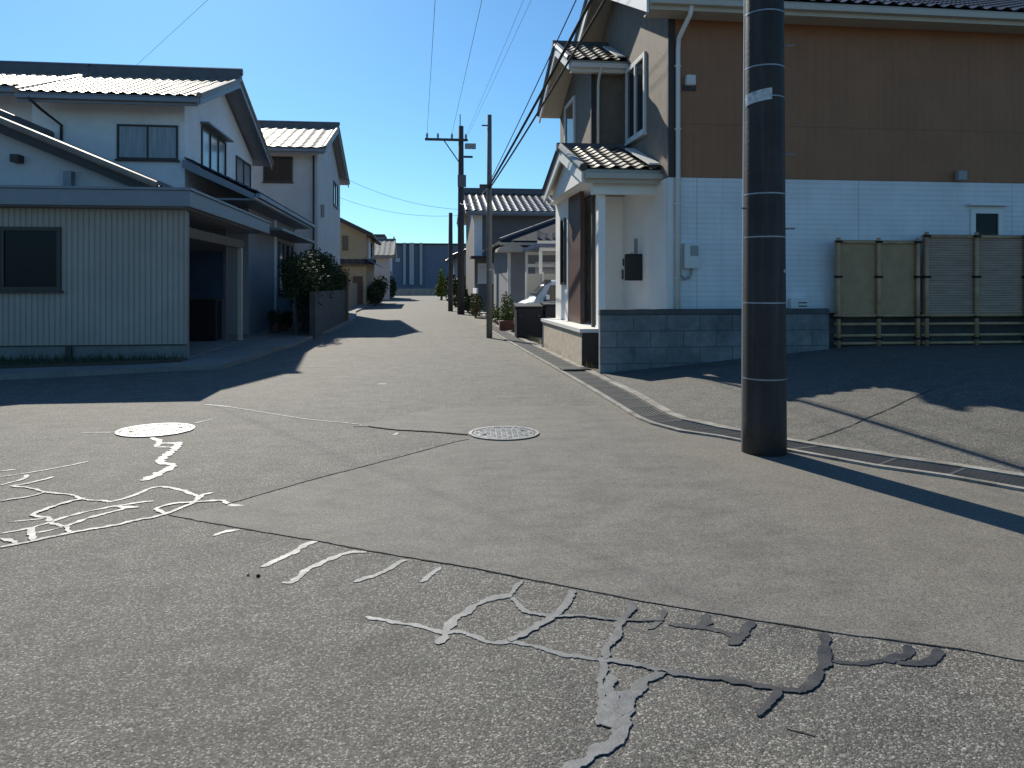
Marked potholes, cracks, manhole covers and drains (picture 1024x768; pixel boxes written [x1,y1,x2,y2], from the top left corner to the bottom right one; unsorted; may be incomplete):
manhole cover [115,423,195,438]
manhole cover [469,426,539,441]
crack [169,515,986,655]
